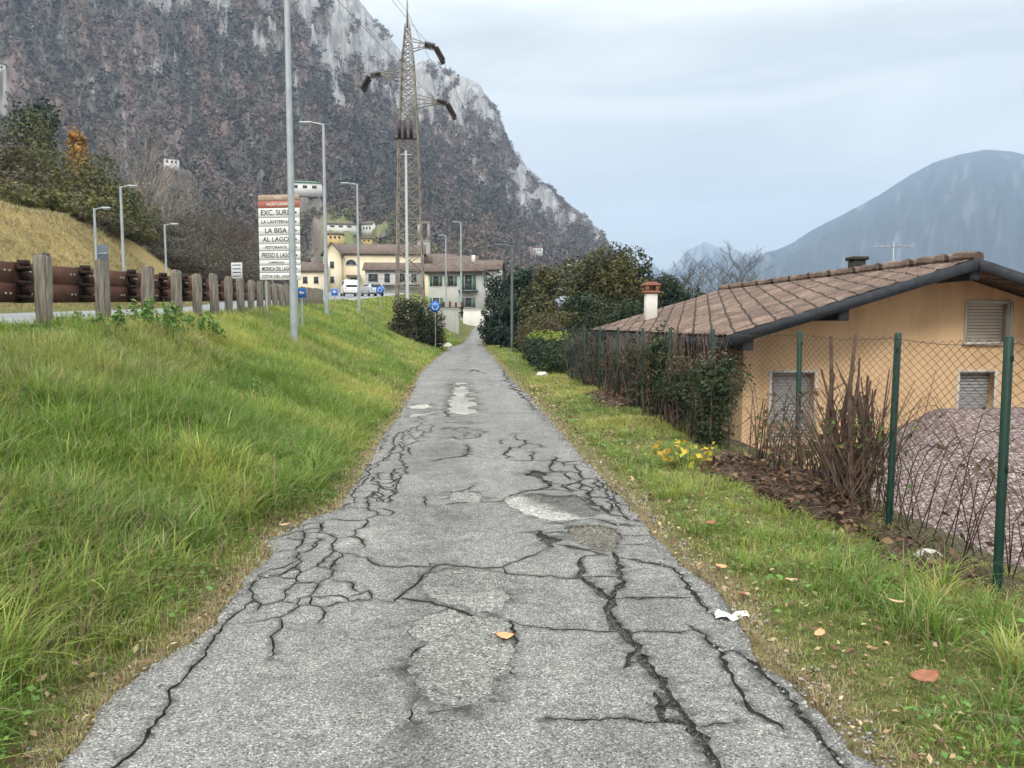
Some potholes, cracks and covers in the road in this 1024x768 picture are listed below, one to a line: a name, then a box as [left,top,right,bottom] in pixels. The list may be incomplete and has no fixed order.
crack [111,411,847,768]
